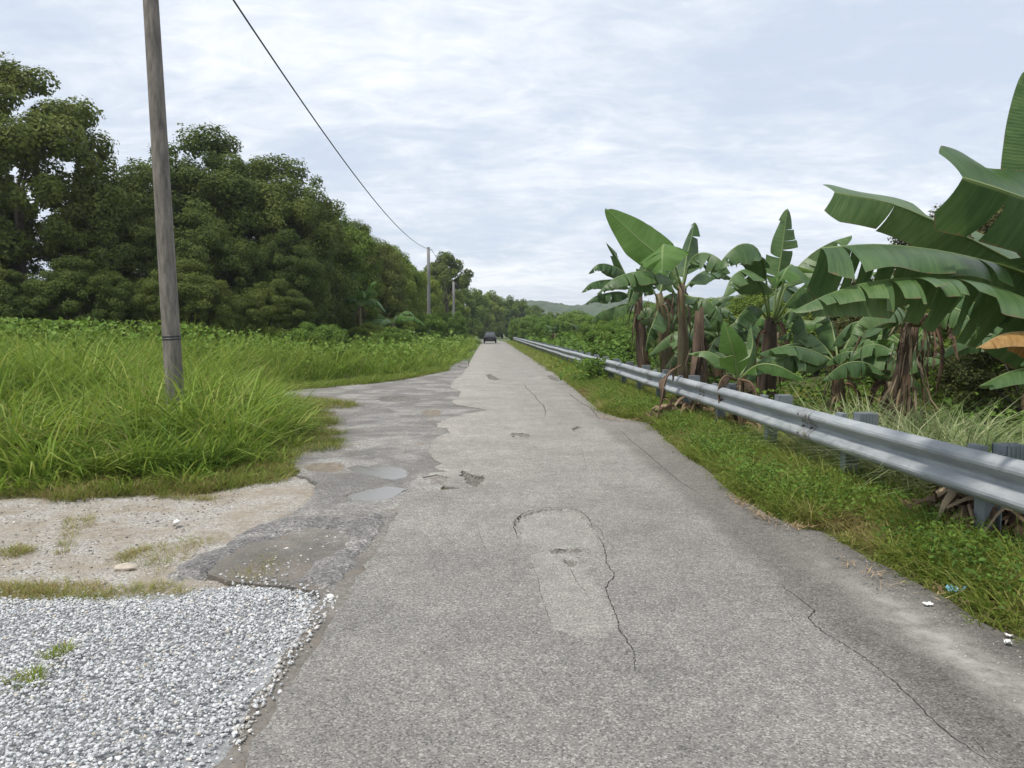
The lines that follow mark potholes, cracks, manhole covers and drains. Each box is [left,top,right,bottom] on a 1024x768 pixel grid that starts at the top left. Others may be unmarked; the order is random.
pothole [459,471,485,487]
crack [513,507,637,676]
pothole [348,465,410,480]
pothole [344,486,408,501]
crack [781,586,1002,768]
crack [619,429,712,502]
